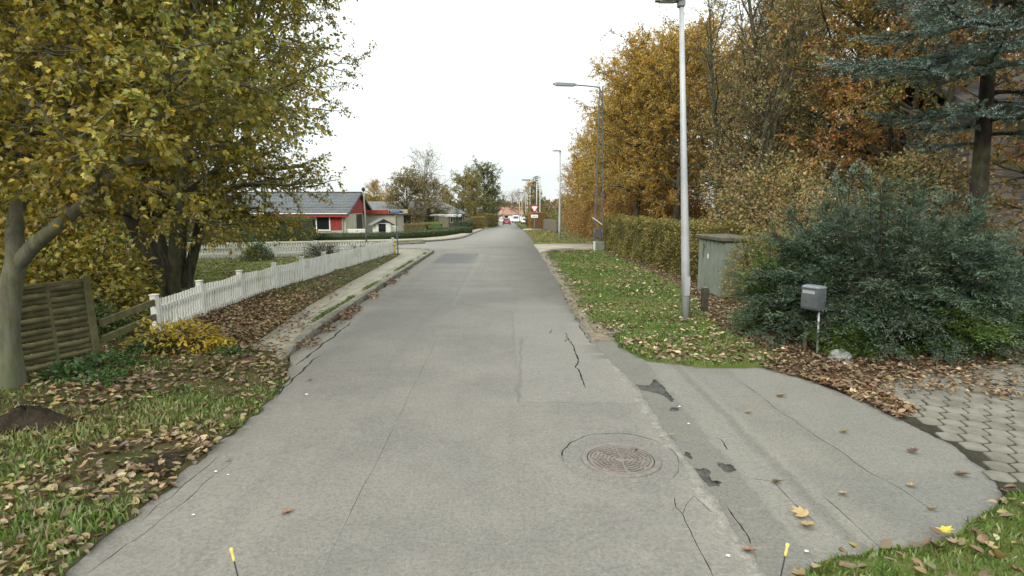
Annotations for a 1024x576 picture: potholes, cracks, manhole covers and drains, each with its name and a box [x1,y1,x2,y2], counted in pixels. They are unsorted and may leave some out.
manhole cover [581,443,662,478]
pothole [636,379,674,402]
pothole [717,462,736,473]
crack [561,433,679,478]
crack [674,496,751,576]
pothole [695,468,722,487]
crack [549,326,593,388]
